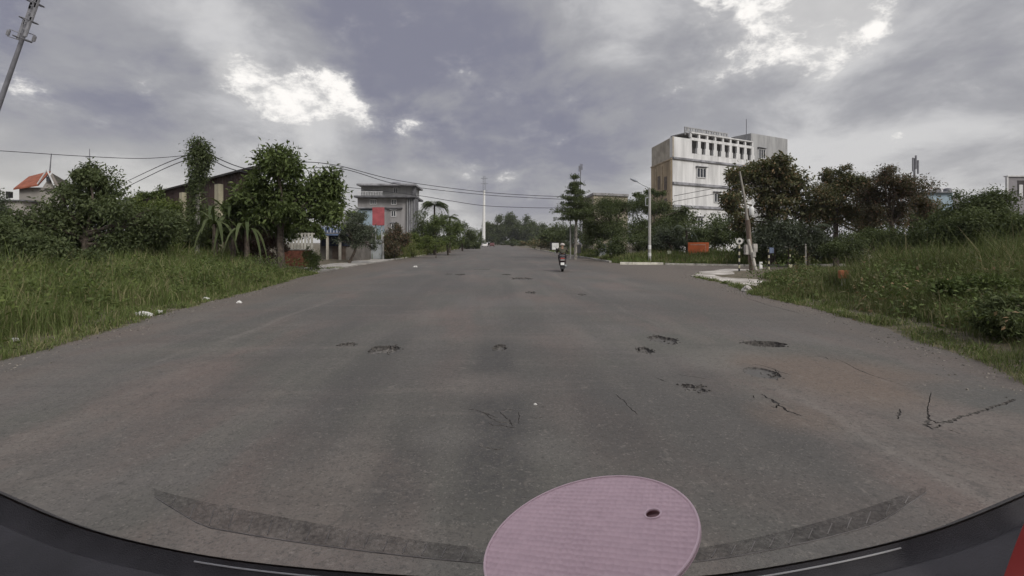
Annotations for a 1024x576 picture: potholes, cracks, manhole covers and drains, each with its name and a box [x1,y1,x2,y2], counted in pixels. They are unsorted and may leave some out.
crack [753,394,801,416]
pothole [743,367,784,380]
pothole [647,334,681,345]
crack [922,393,1016,434]
pothole [367,344,404,355]
crack [469,409,542,428]
pothole [676,383,712,393]
